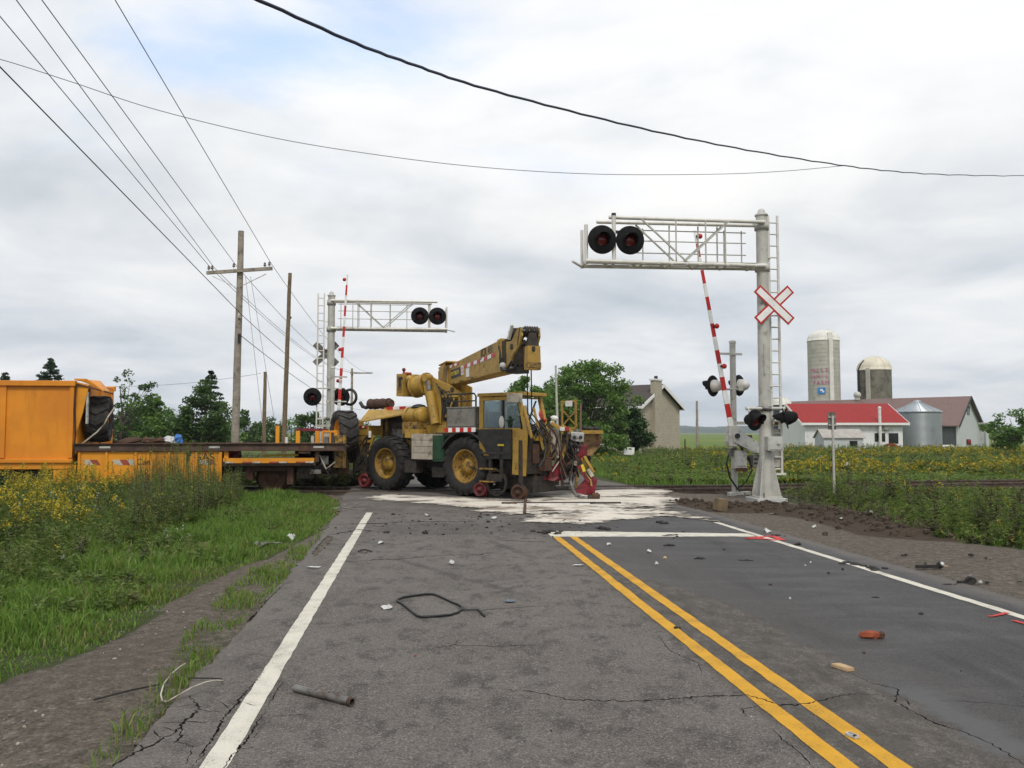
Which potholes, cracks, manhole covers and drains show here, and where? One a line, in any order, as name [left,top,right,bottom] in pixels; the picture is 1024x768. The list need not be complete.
crack [852,673,1024,764]
crack [438,640,518,648]
crack [480,687,890,716]
crack [112,674,303,768]
